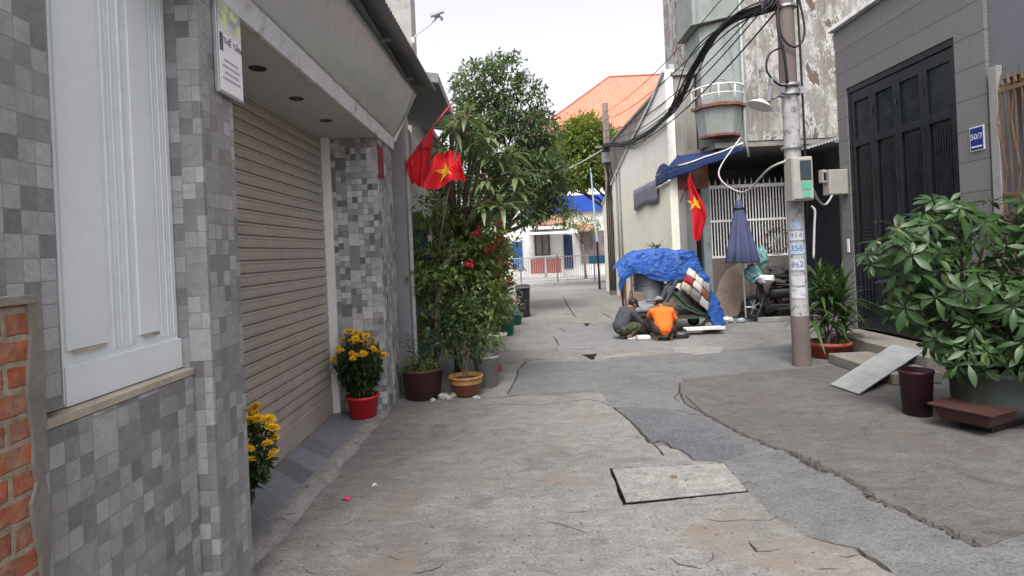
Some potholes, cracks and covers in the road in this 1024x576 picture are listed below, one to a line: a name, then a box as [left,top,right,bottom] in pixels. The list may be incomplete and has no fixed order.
crack [490,297,983,573]
manhole cover [609,463,748,505]
